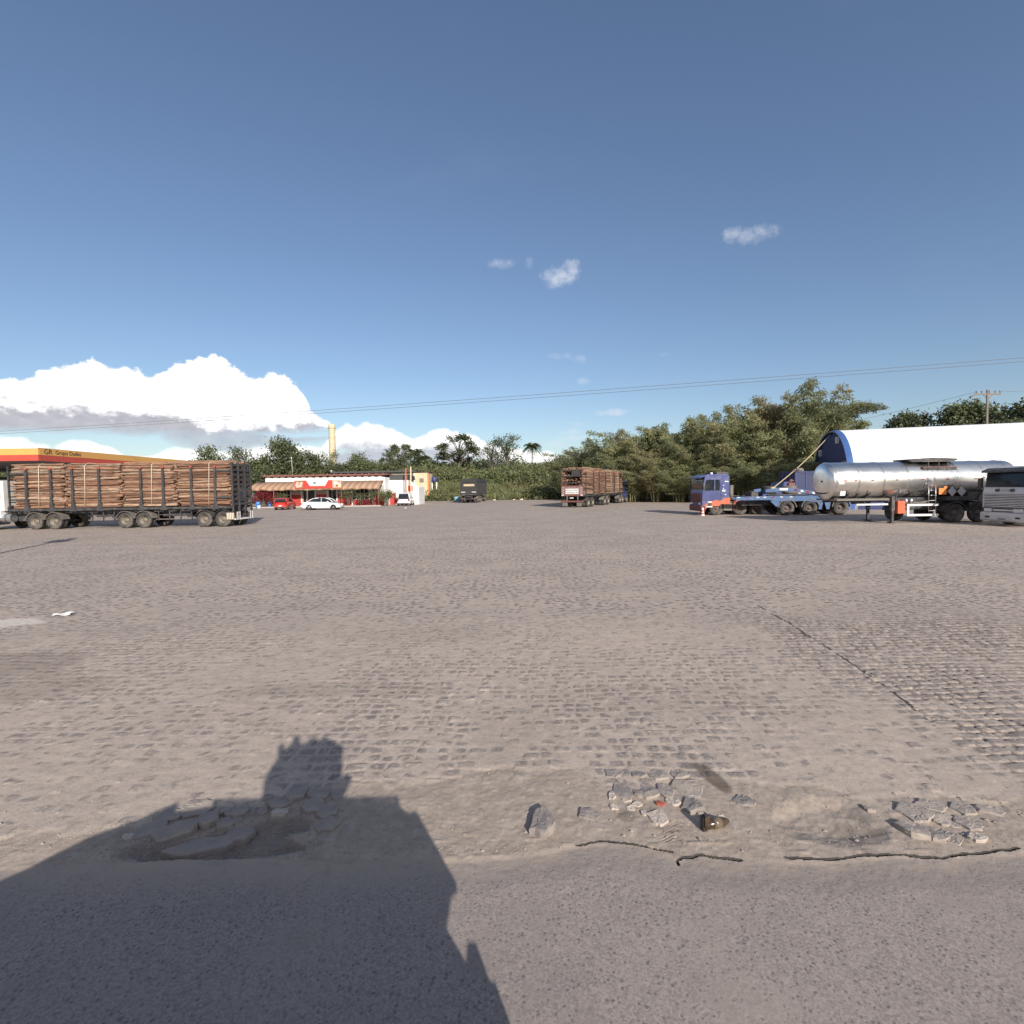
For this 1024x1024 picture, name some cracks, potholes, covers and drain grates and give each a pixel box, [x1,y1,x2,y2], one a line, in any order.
pothole [114,813,316,862]
crack [757,605,936,726]
crack [575,840,743,866]
crack [783,847,1021,861]
